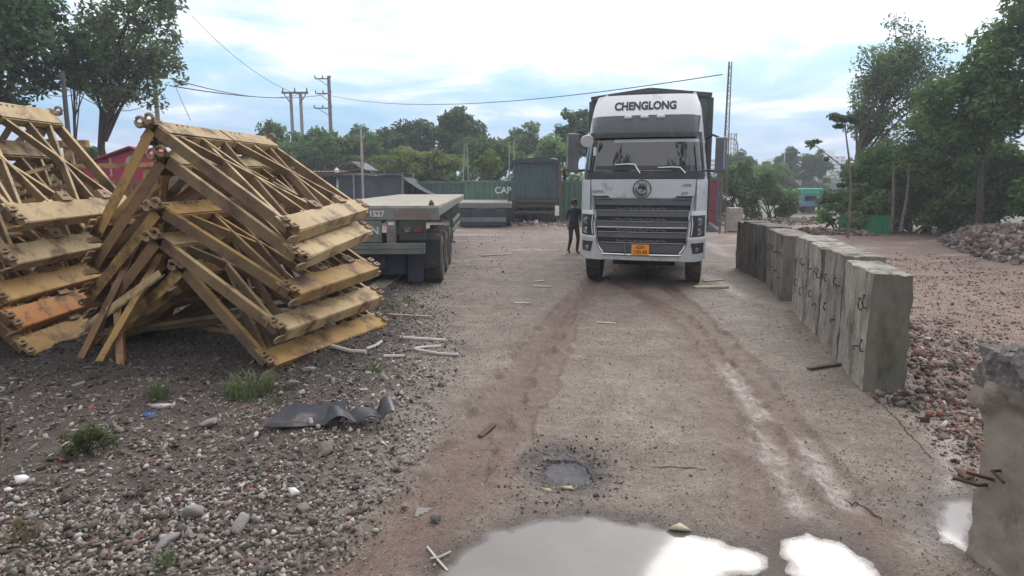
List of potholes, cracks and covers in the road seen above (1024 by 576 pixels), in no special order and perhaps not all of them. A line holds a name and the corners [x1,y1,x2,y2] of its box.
pothole [530,454,604,489]
